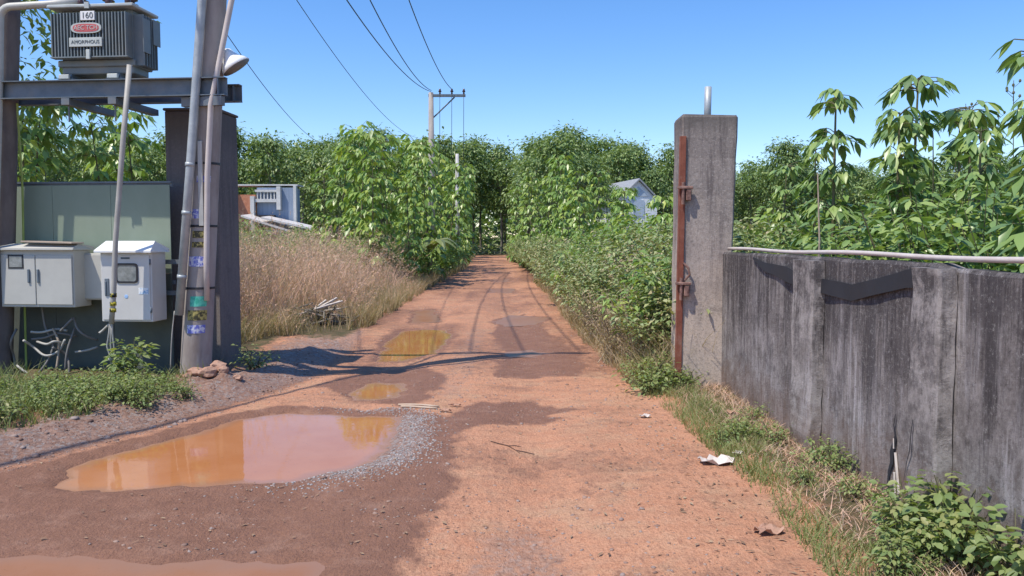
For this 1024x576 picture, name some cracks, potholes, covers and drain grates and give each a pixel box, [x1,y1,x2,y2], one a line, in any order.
pothole [26,406,418,495]
pothole [0,538,348,576]
pothole [338,381,420,403]
pothole [366,328,460,363]
